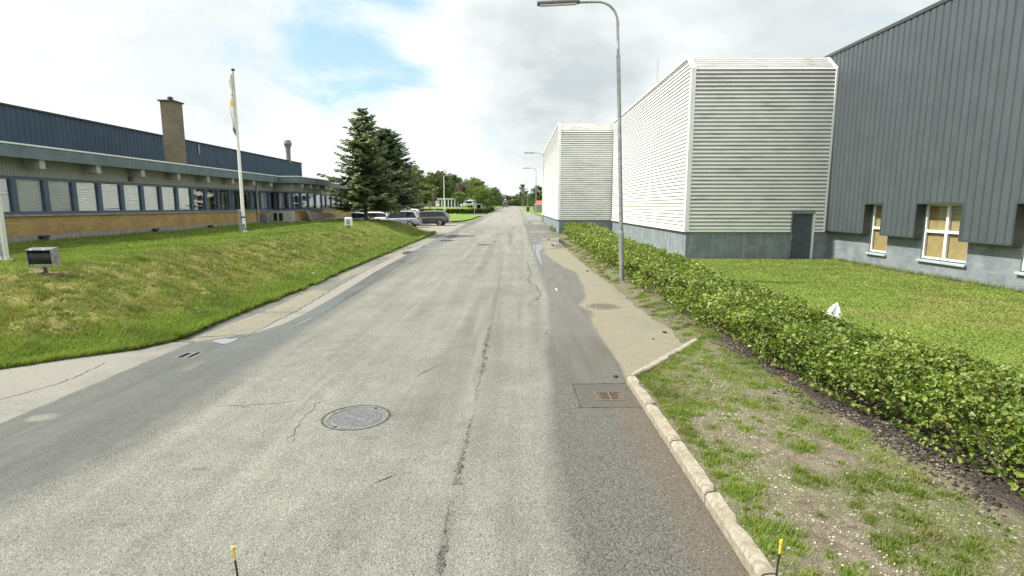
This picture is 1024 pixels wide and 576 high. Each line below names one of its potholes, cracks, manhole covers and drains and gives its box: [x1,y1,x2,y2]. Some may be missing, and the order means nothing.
drain grate [594,391,625,400]
manhole cover [321,405,391,431]
crack [221,400,322,442]
